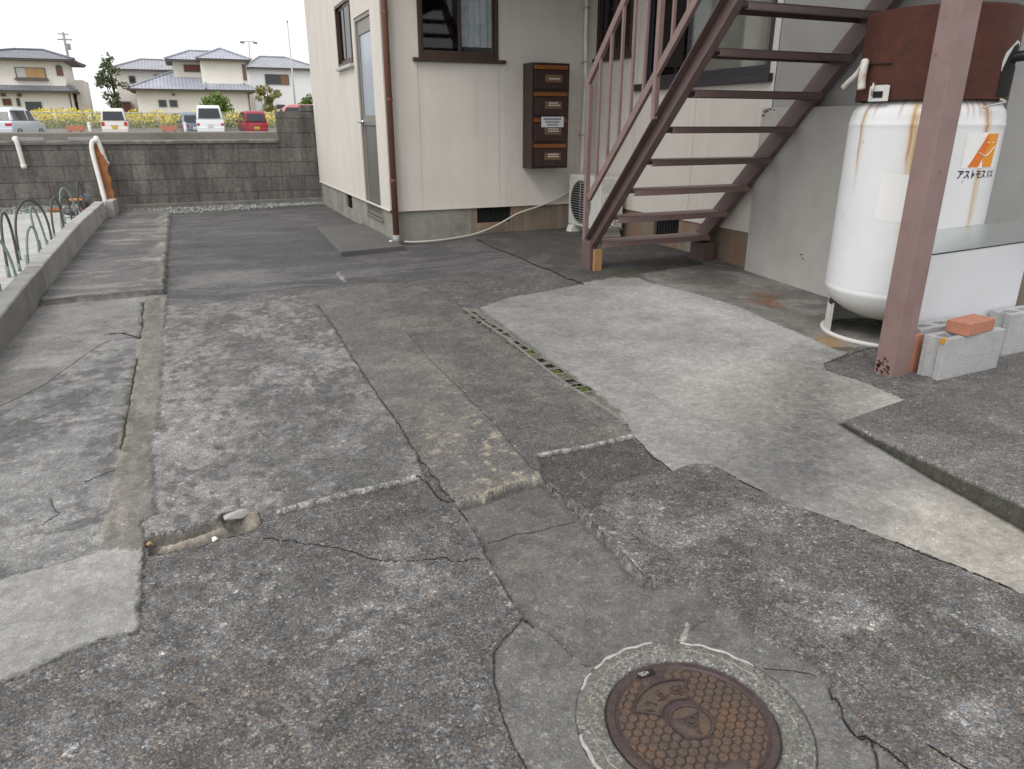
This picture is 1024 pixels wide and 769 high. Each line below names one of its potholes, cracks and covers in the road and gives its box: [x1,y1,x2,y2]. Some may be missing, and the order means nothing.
crack [763,668,909,769]
crack [110,302,144,339]
manhole cover [575,642,818,769]
pothole [145,510,262,556]
crack [263,479,652,584]
